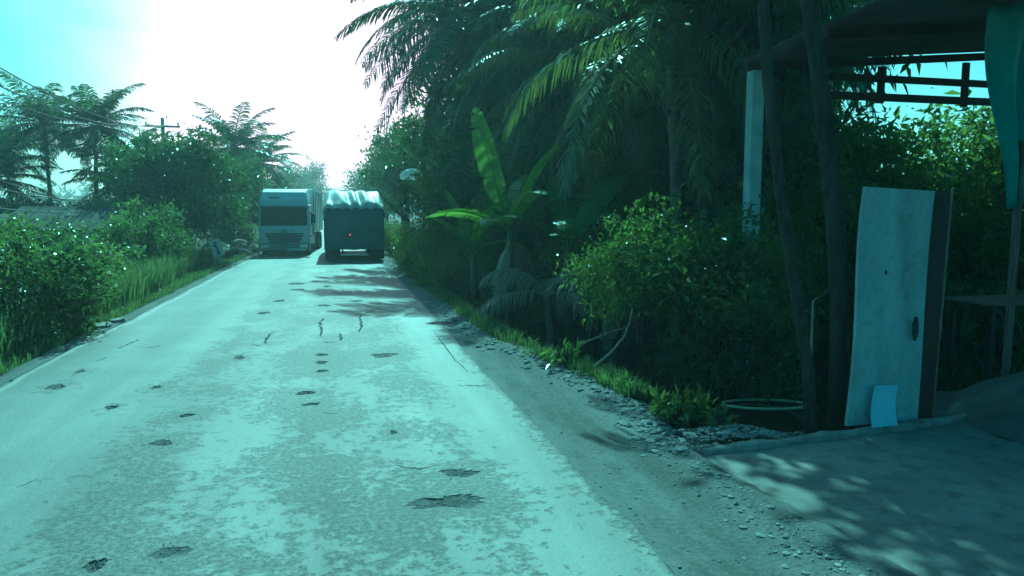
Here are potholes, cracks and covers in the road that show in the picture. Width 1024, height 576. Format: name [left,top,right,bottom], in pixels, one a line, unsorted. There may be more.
crack [318,310,374,343]
pothole [147,546,194,559]
pothole [83,558,109,573]
pothole [404,493,488,509]
pothole [439,469,481,477]
